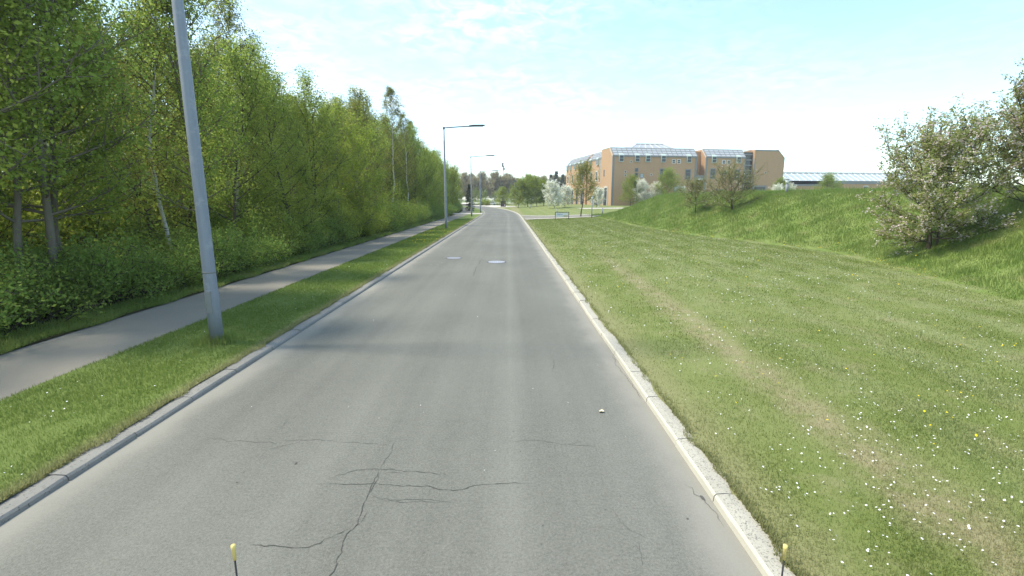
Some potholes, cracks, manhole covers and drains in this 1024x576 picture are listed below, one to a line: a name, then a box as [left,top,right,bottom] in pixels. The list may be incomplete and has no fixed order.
crack [253,419,529,576]
